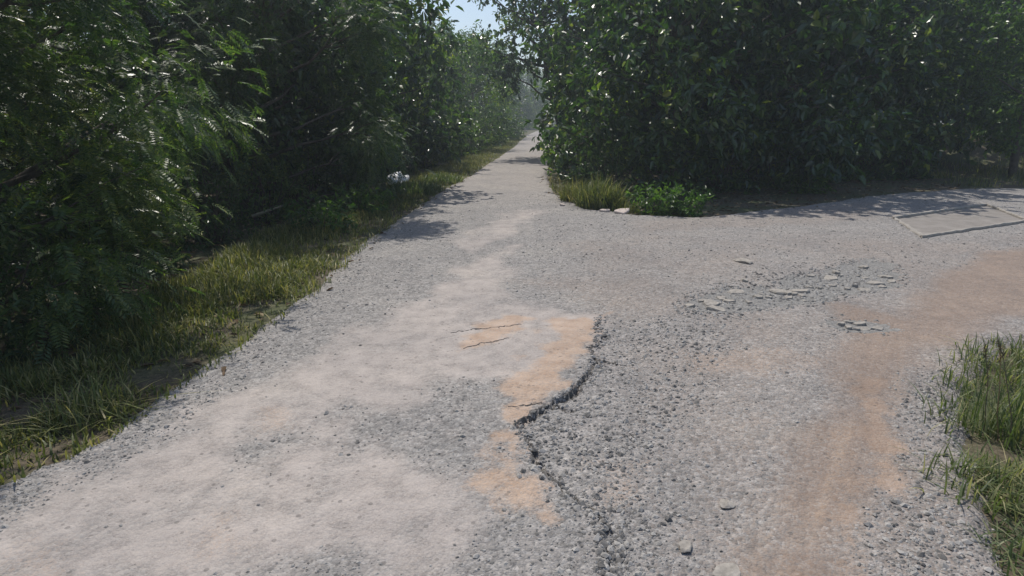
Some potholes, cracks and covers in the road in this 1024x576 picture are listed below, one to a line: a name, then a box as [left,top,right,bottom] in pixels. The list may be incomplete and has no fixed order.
crack [451,324,522,349]
crack [508,315,627,567]
